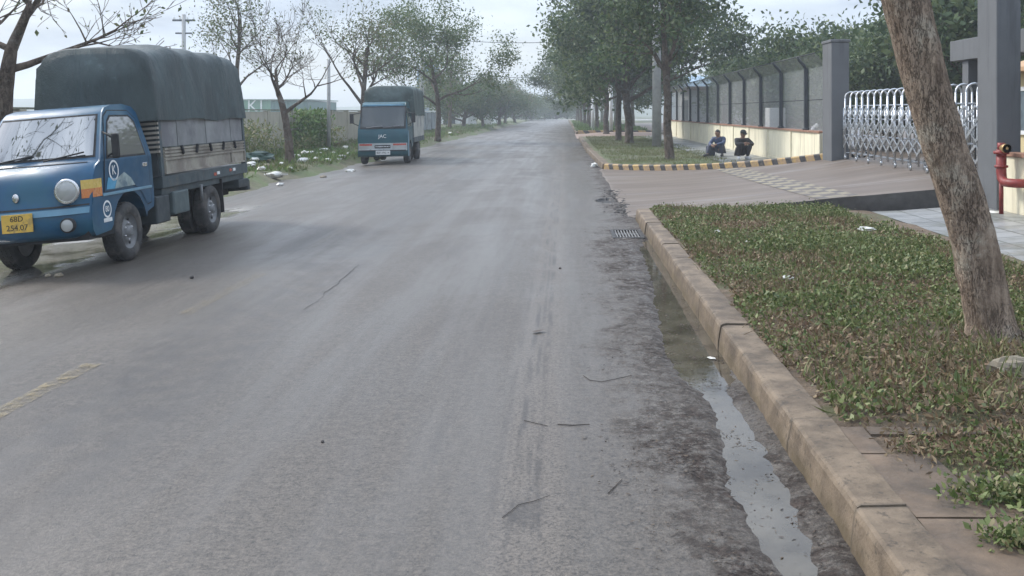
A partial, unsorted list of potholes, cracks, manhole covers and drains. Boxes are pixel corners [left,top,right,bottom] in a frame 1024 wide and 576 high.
drain grate [610,230,645,239]
